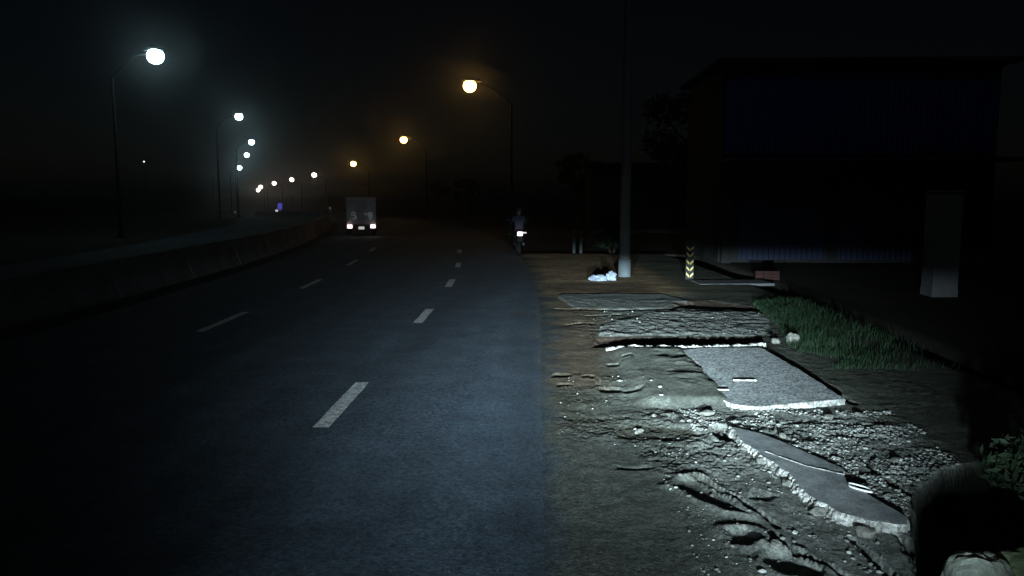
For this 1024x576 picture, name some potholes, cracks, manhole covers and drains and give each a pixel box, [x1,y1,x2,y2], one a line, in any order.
crack [855,540,916,576]
crack [692,475,846,576]
pothole [594,337,767,348]
